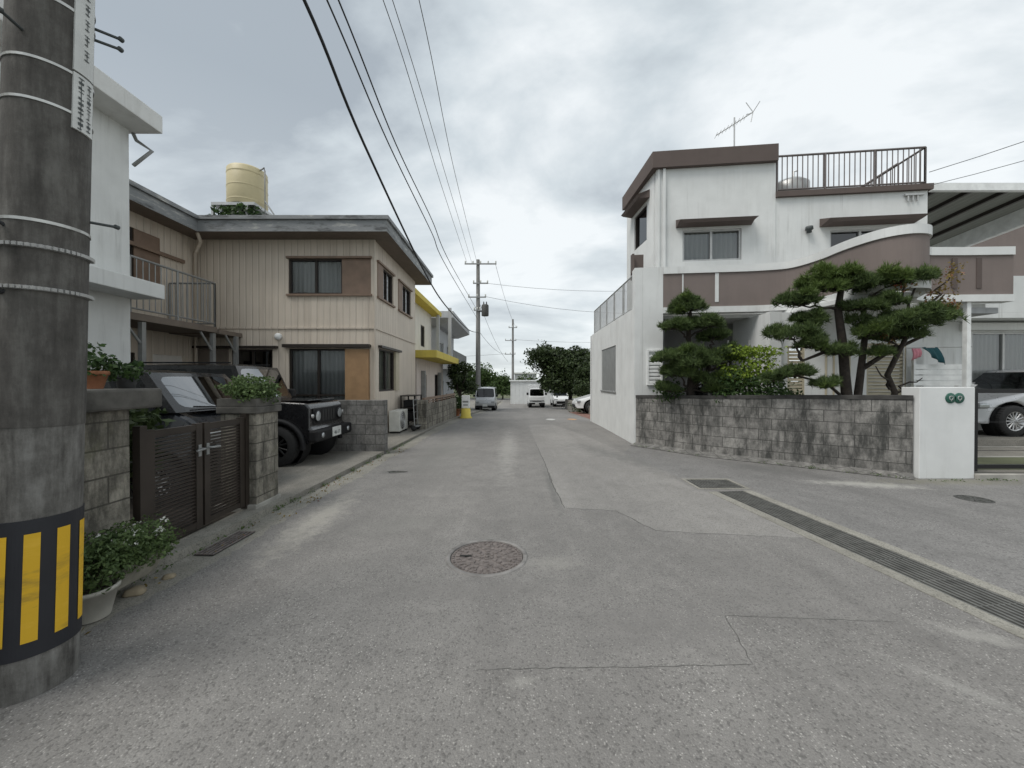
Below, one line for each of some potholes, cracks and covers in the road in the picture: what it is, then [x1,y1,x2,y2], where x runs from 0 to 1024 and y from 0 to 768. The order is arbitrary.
drain grate [195,531,255,556]
manhole cover [953,495,995,503]
manhole cover [446,539,528,577]
